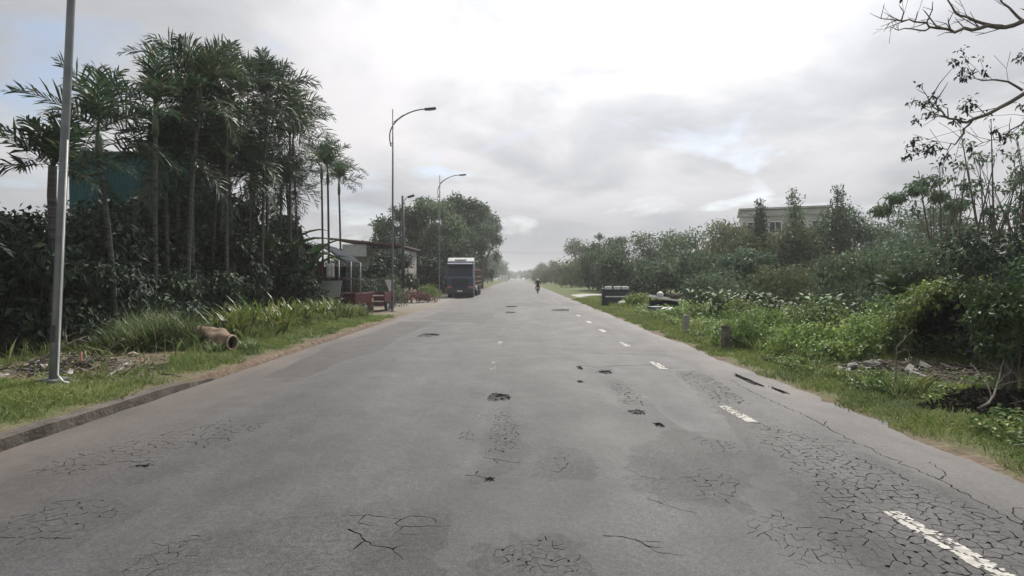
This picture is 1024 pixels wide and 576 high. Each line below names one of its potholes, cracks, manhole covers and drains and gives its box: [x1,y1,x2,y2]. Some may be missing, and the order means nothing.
crack [109,533,211,576]
pothole [487,392,512,402]
crack [29,420,268,475]
crack [493,536,581,573]
crack [675,370,1024,576]
crack [467,412,520,478]
crack [347,514,436,559]
crack [0,499,118,545]
crack [603,535,676,555]
